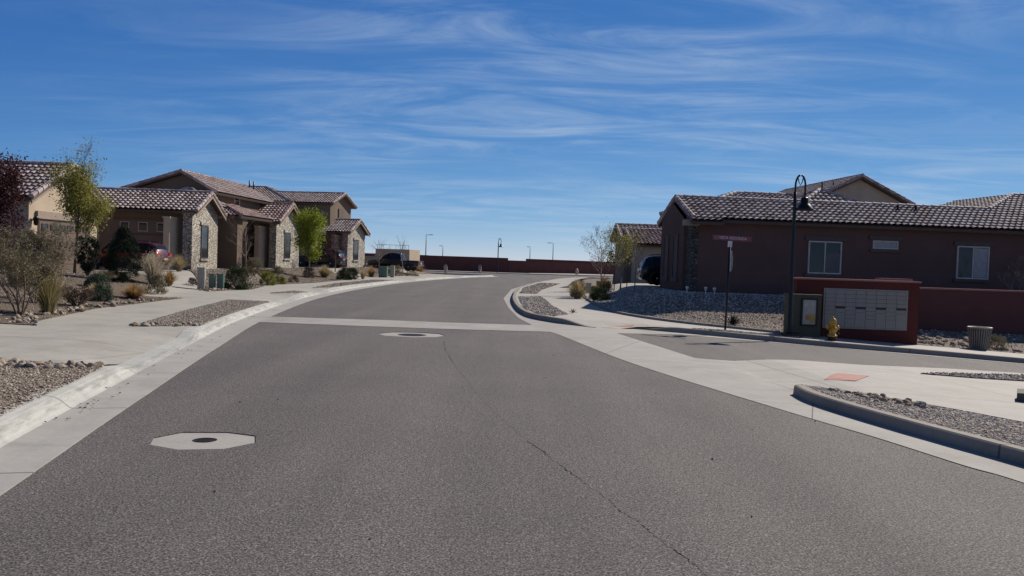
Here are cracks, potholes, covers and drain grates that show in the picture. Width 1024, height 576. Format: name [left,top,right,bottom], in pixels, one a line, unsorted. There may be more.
crack [445,351,707,576]
manhole cover [150,432,256,450]
